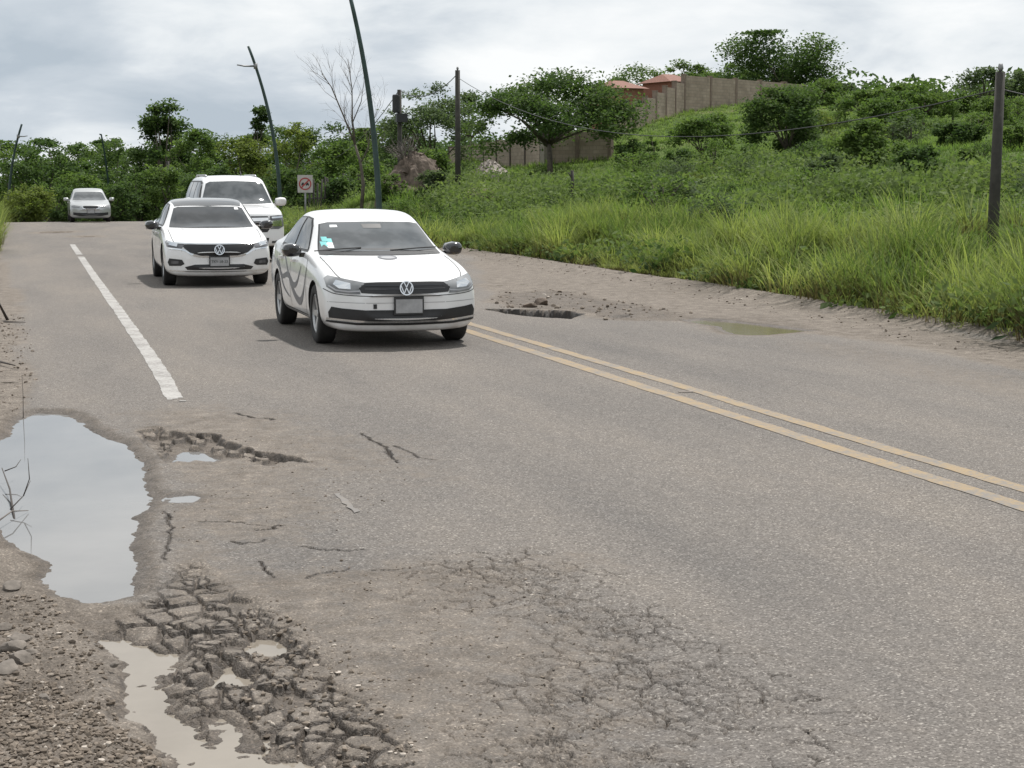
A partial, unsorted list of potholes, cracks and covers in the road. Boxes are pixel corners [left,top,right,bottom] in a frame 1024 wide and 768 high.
pothole [483,308,588,319]
pothole [181,491,211,503]
crack [196,520,909,768]
crack [358,432,438,463]
pothole [0,406,181,607]
crack [165,512,178,552]
pothole [135,425,311,466]
pothole [681,317,819,335]
pothole [64,558,431,768]
